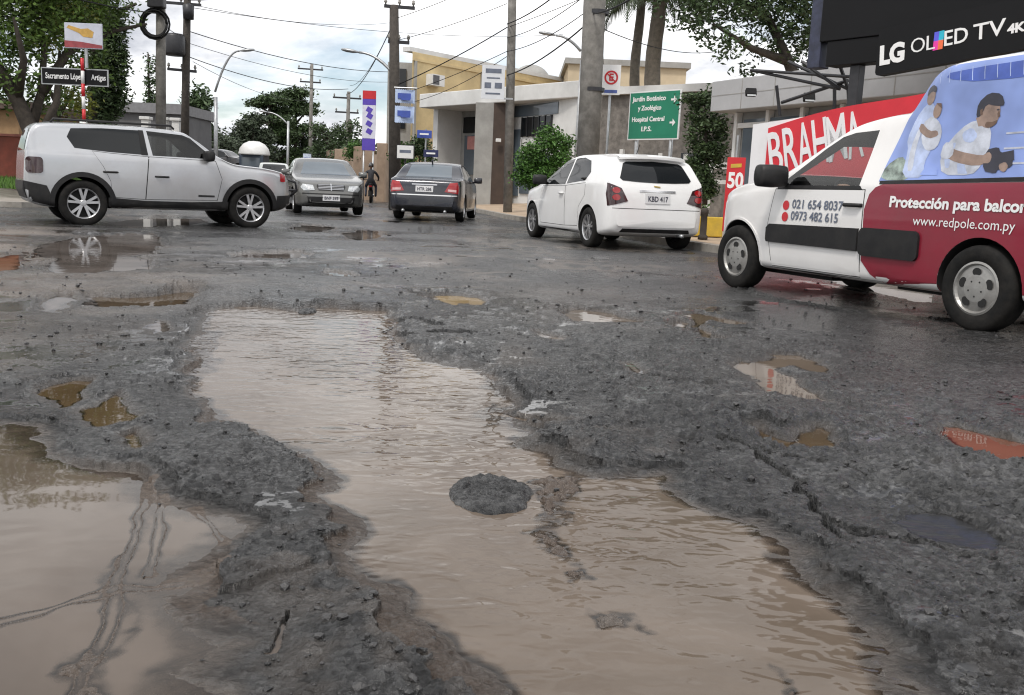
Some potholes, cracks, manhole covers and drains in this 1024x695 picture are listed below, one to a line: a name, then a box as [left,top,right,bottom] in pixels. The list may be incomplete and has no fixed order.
pothole [21,231,171,273]
pothole [923,417,1024,460]
pothole [331,229,391,240]
pothole [867,499,1024,558]
pothole [22,372,106,410]
crack [715,433,1005,561]
pothole [70,279,214,307]
pothole [409,288,498,305]
pothole [164,297,975,695]
pothole [57,386,159,428]
pothole [0,412,285,695]
